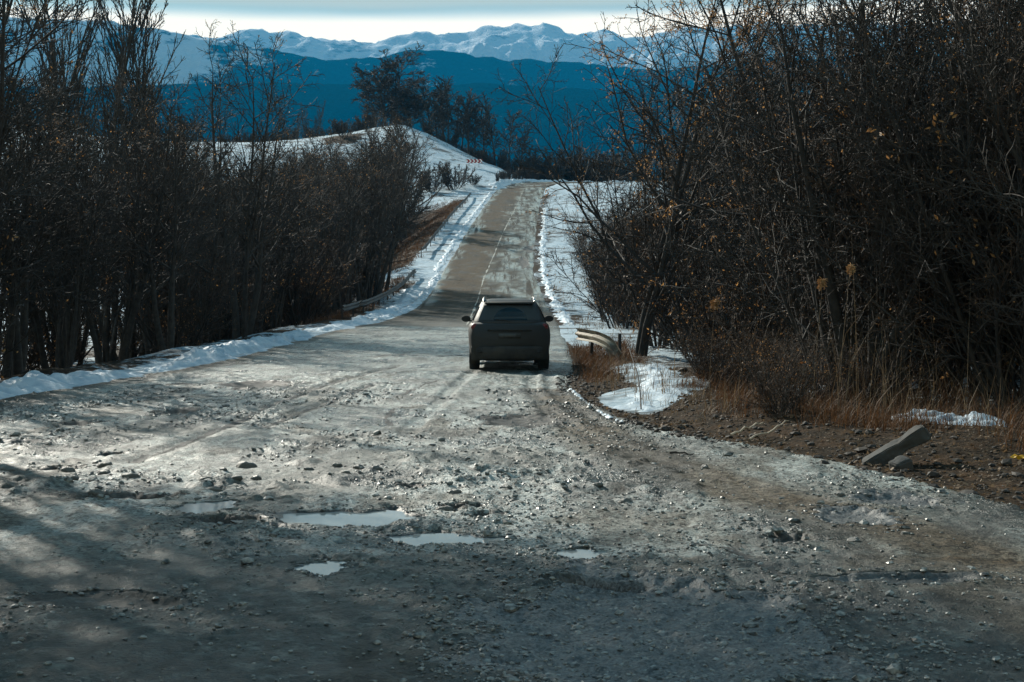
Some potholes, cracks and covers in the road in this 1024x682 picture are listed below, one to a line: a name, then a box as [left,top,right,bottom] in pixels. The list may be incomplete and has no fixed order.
pothole [357,529,517,549]
pothole [541,548,626,560]
pothole [226,505,428,530]
pothole [815,571,993,585]
pothole [162,500,238,520]
pothole [290,557,357,578]
